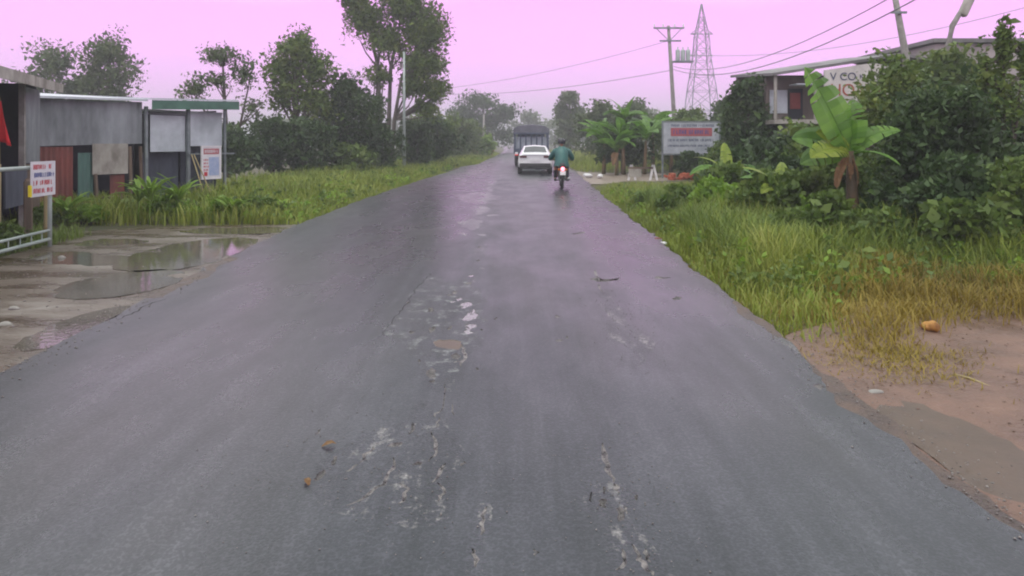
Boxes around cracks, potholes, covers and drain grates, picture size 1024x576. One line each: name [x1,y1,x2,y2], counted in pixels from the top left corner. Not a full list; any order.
crack [472,507,487,567]
crack [615,544,654,576]
crack [408,385,466,501]
crack [589,444,628,514]
crack [454,345,467,367]
crack [346,447,410,506]
